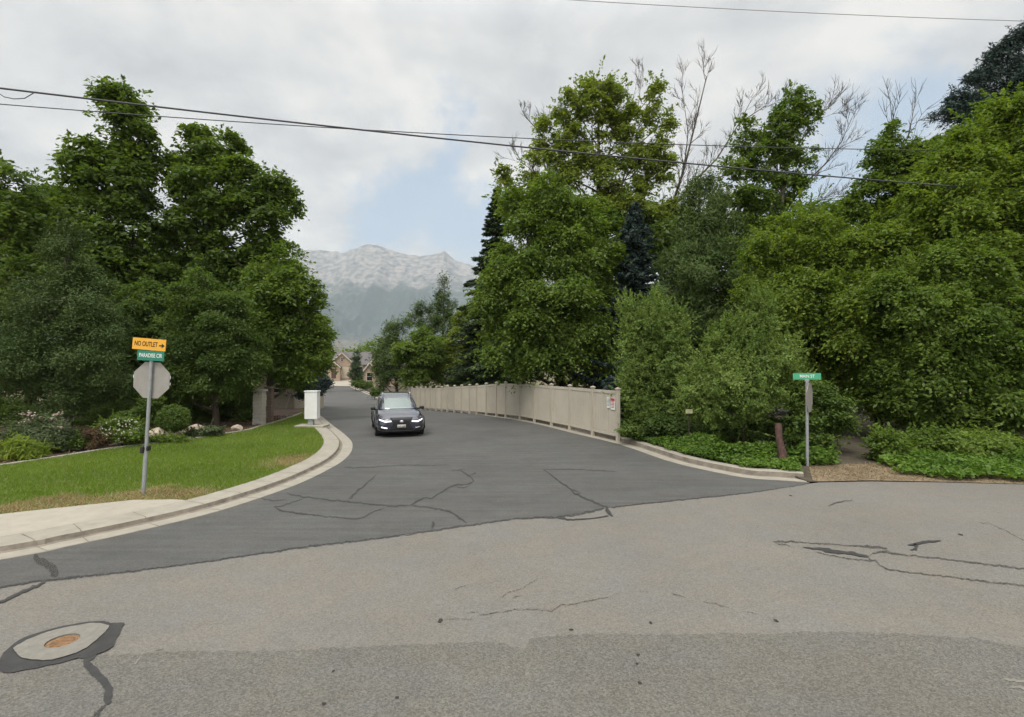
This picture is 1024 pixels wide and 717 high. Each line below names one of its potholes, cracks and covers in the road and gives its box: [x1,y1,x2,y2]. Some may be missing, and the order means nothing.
crack [773,540,1024,586]
manhole cover [0,621,124,673]
crack [445,579,612,620]
crack [262,498,380,519]
crack [346,464,475,504]
crack [0,582,45,603]
